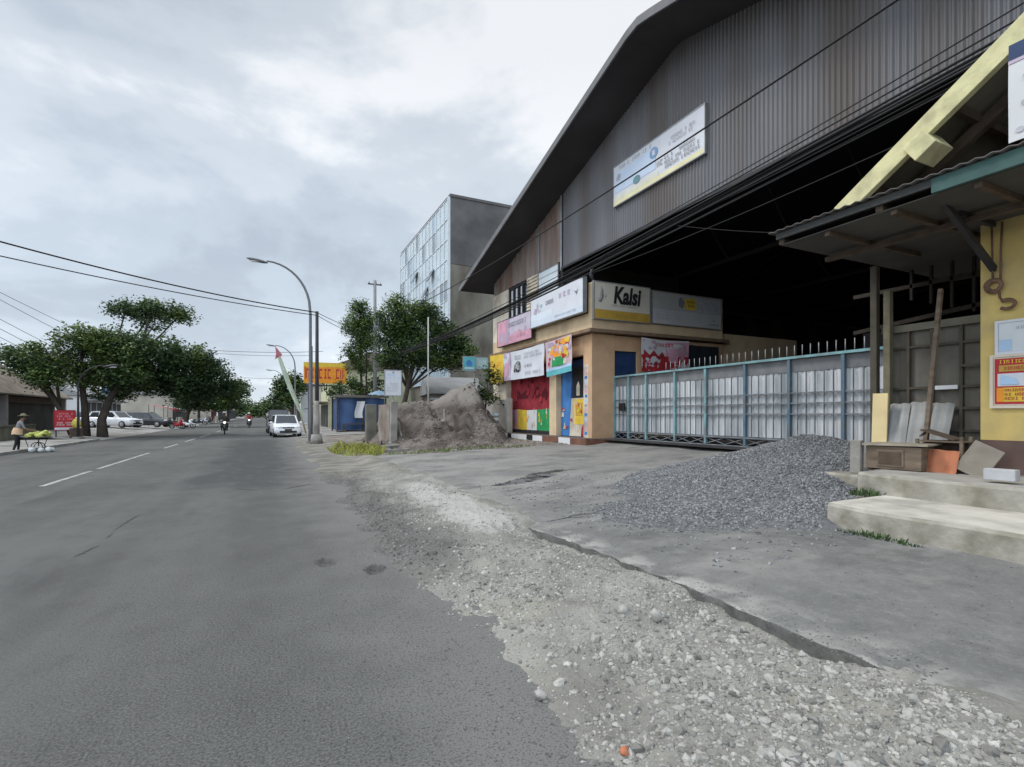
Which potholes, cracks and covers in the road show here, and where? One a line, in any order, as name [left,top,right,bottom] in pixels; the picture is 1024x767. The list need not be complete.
pothole [491,469,578,486]
pothole [315,557,337,567]
crack [74,515,139,557]
pothole [363,564,387,575]
